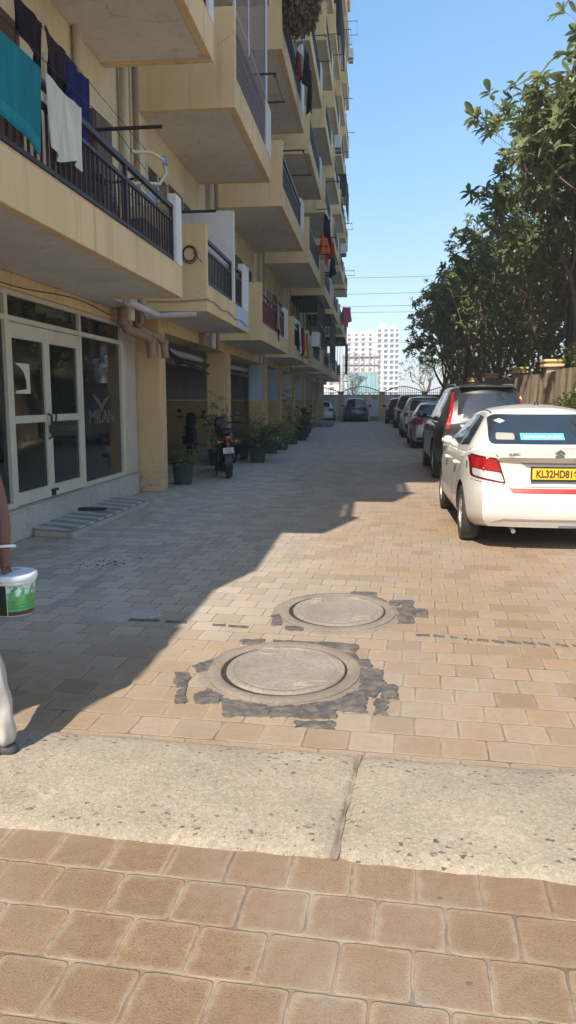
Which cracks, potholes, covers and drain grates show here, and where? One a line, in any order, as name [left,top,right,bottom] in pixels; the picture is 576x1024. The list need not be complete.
manhole cover [173,639,399,730]
manhole cover [271,591,429,636]
